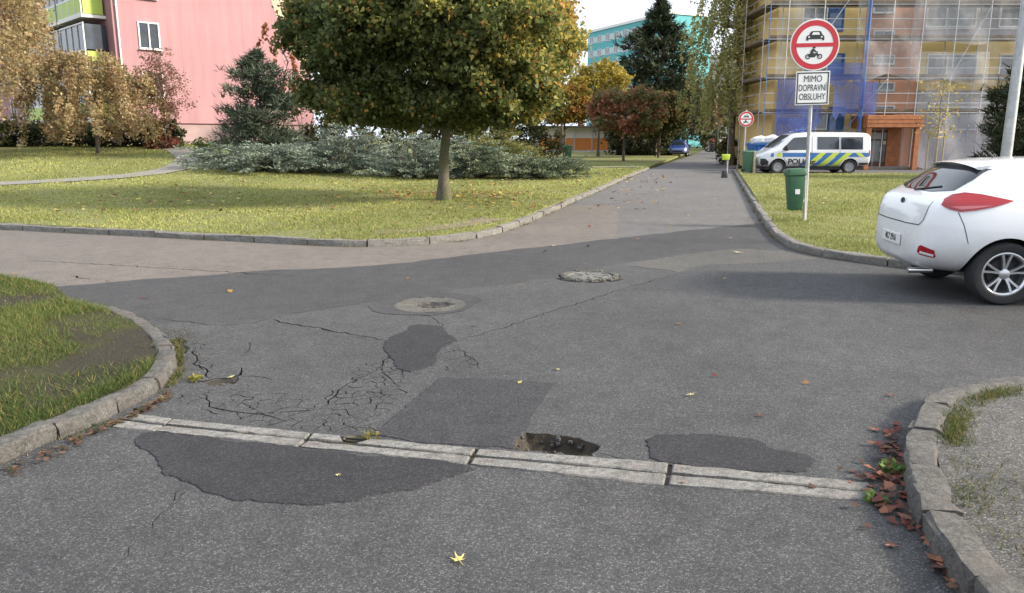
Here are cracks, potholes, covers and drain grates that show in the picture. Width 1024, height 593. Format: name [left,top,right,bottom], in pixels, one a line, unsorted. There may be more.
pothole [513,433,602,456]
manhole cover [394,297,466,312]
crack [172,318,407,433]
manhole cover [556,269,623,283]
crack [121,486,187,561]
